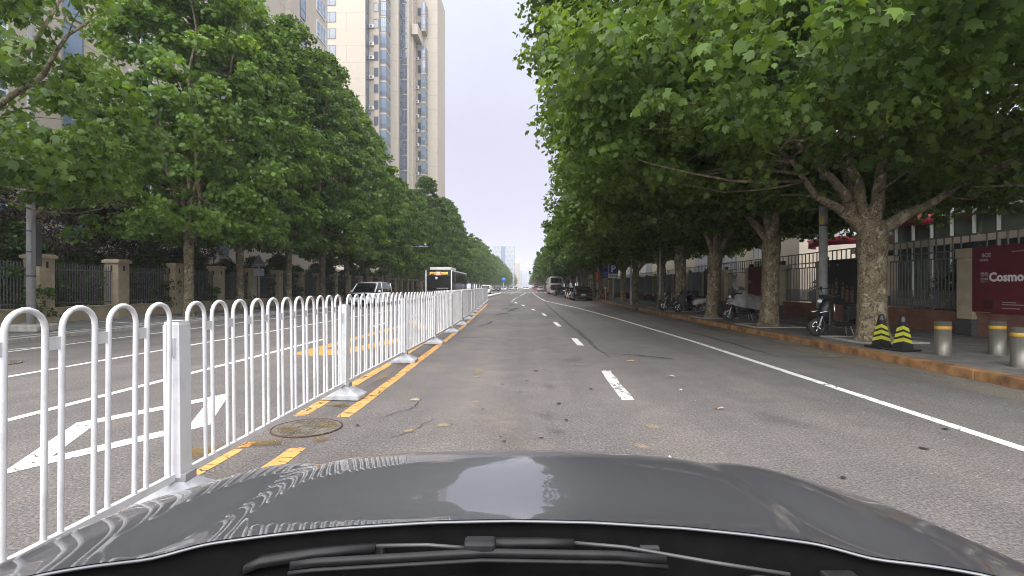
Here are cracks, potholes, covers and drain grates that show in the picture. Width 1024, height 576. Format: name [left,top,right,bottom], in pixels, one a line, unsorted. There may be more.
manhole cover [270,418,343,438]
